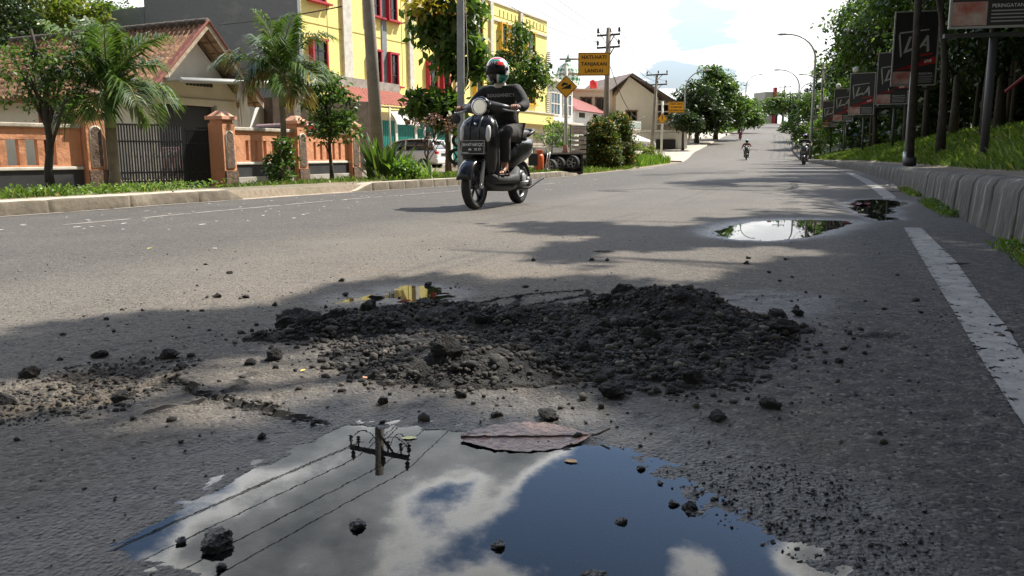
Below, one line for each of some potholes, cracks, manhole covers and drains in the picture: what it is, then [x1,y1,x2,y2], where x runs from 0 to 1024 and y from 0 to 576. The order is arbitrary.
crack [103,372,332,427]
pothole [382,287,447,303]
pothole [845,198,911,221]
pothole [711,219,854,241]
pothole [112,422,838,576]
